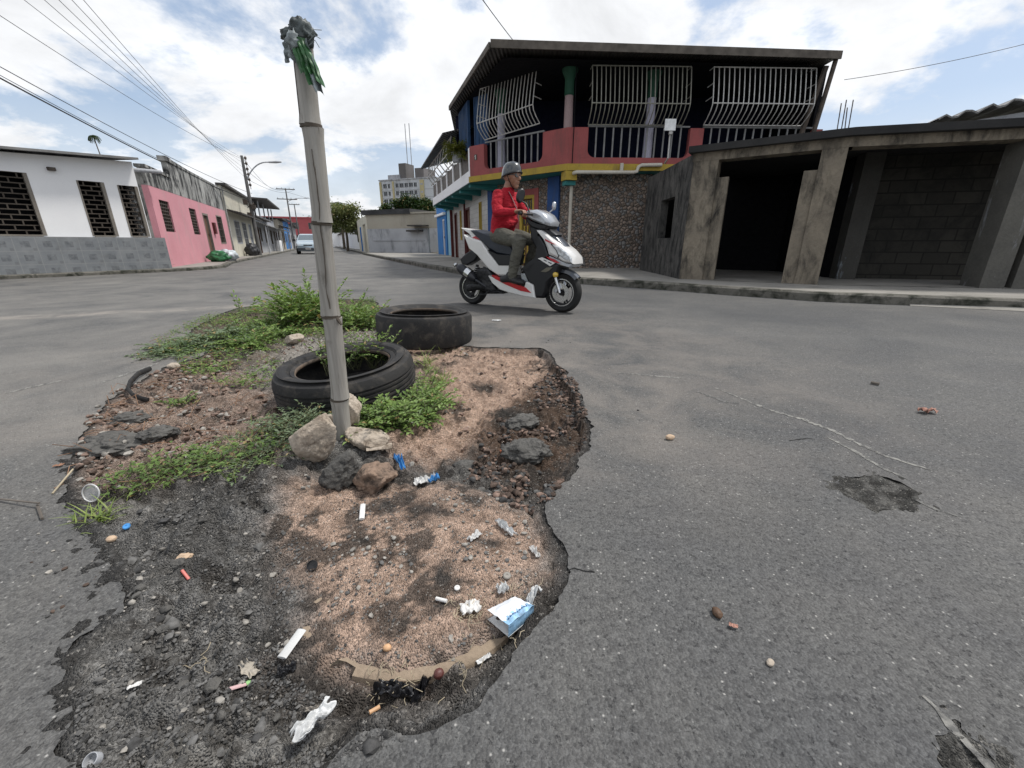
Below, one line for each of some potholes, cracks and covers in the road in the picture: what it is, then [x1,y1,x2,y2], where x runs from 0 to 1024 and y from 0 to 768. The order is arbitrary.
pothole [931,705,1017,768]
pothole [20,299,594,768]
crack [621,373,958,517]
pothole [823,470,940,514]
